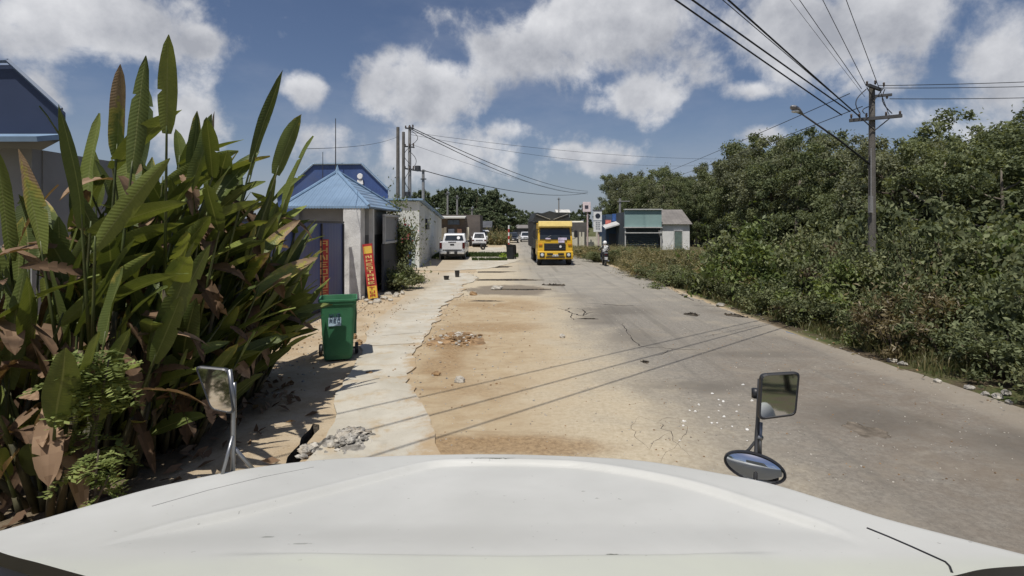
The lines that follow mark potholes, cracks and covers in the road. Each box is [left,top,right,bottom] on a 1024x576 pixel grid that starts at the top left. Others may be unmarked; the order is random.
crack [558,303,633,320]
